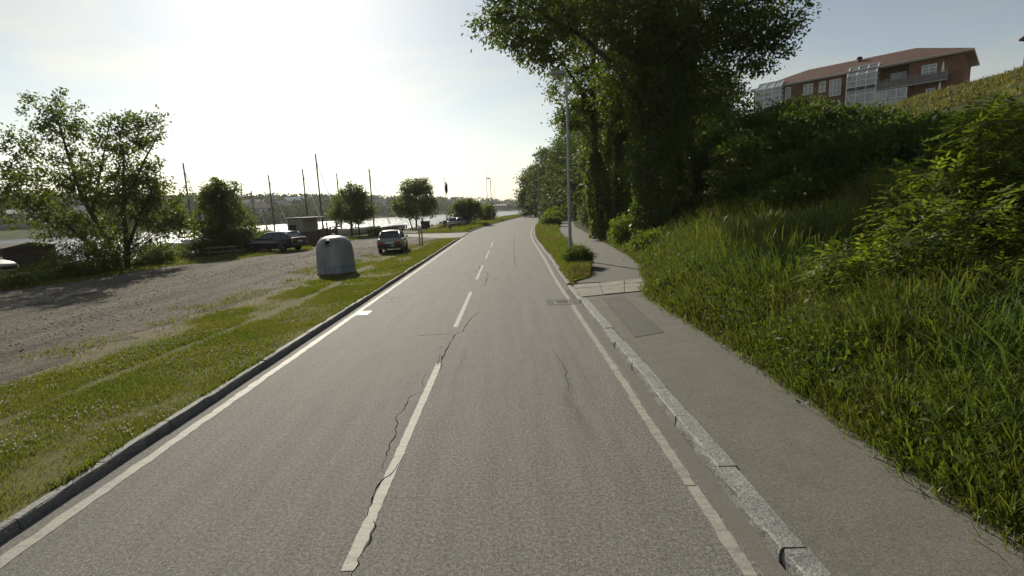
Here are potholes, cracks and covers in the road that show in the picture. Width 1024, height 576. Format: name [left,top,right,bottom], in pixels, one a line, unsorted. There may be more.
crack [351,313,478,576]
